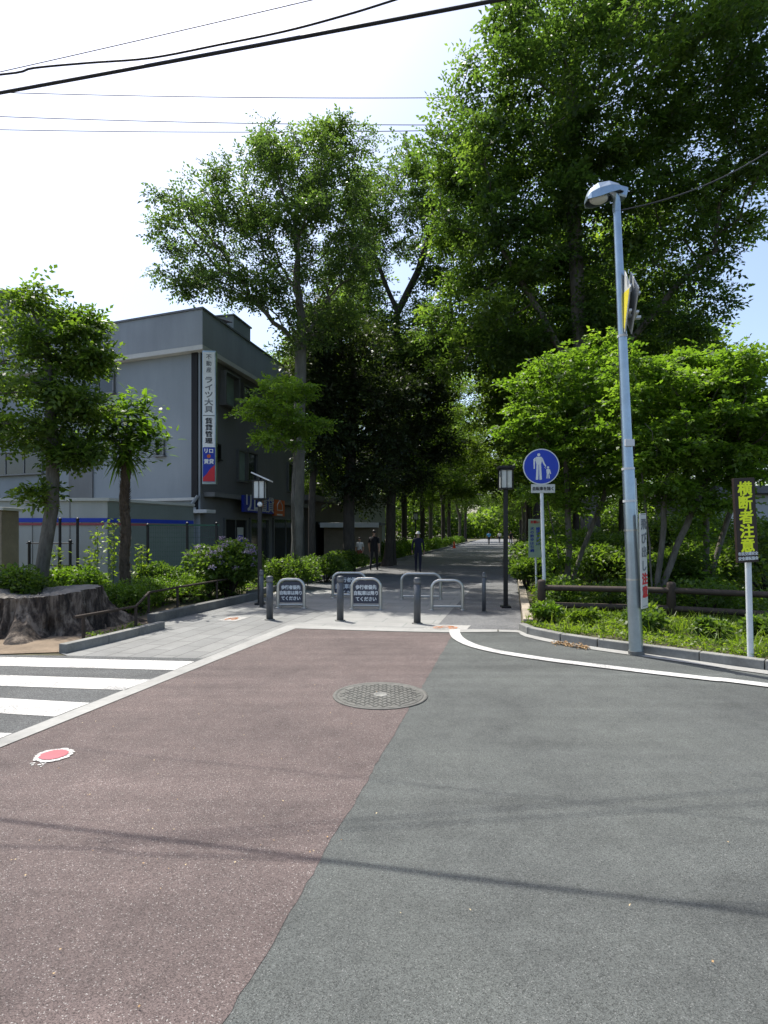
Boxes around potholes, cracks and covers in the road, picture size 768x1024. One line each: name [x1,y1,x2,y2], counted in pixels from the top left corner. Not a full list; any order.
manhole cover [333,682,428,710]
